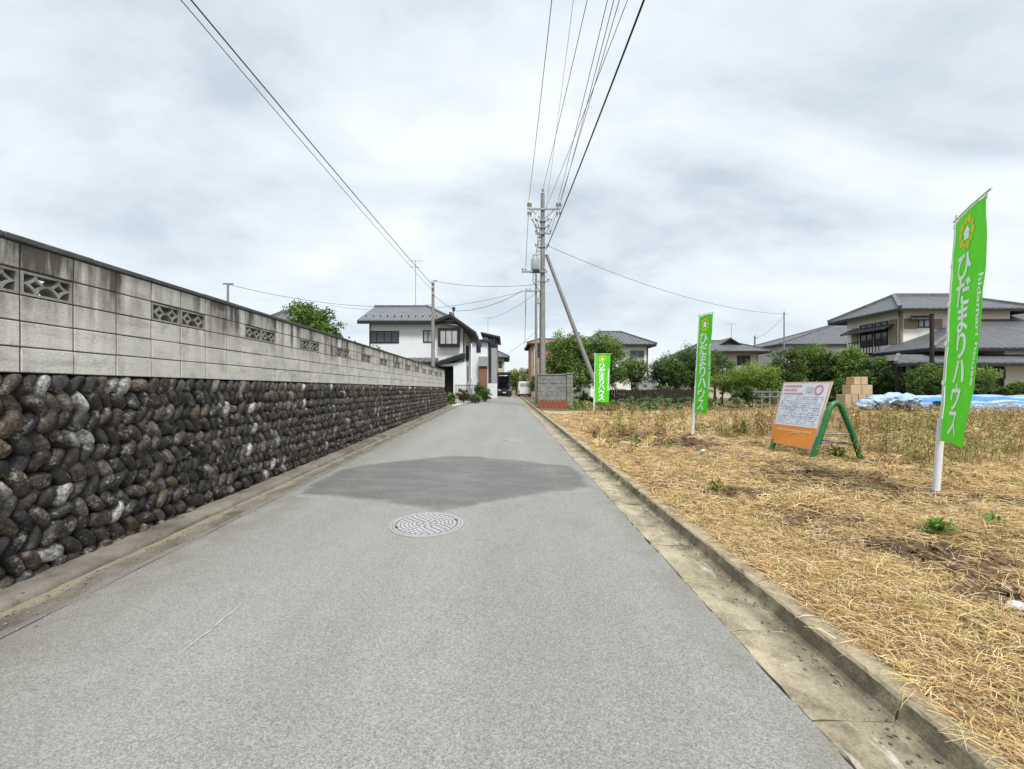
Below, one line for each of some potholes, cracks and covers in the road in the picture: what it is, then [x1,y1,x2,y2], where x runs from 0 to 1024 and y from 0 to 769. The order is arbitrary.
manhole cover [389,512,464,538]
